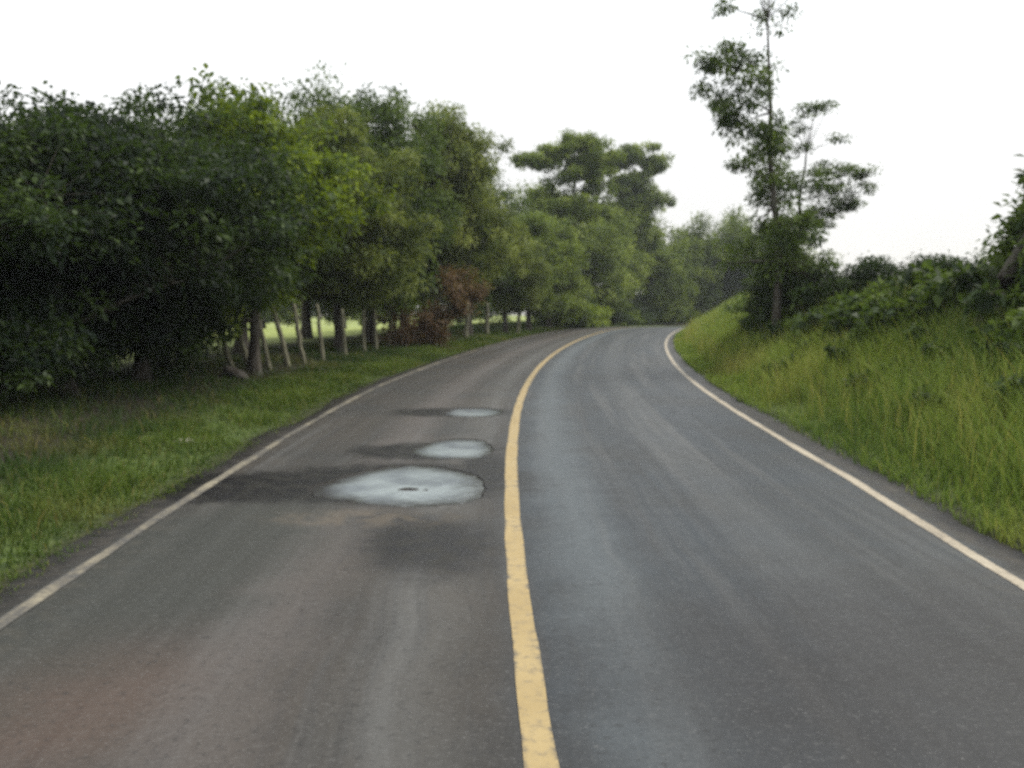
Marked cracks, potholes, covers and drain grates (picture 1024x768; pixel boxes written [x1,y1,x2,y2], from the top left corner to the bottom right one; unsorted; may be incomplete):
pothole [308,465,486,507]
pothole [412,439,494,459]
pothole [442,408,504,417]
